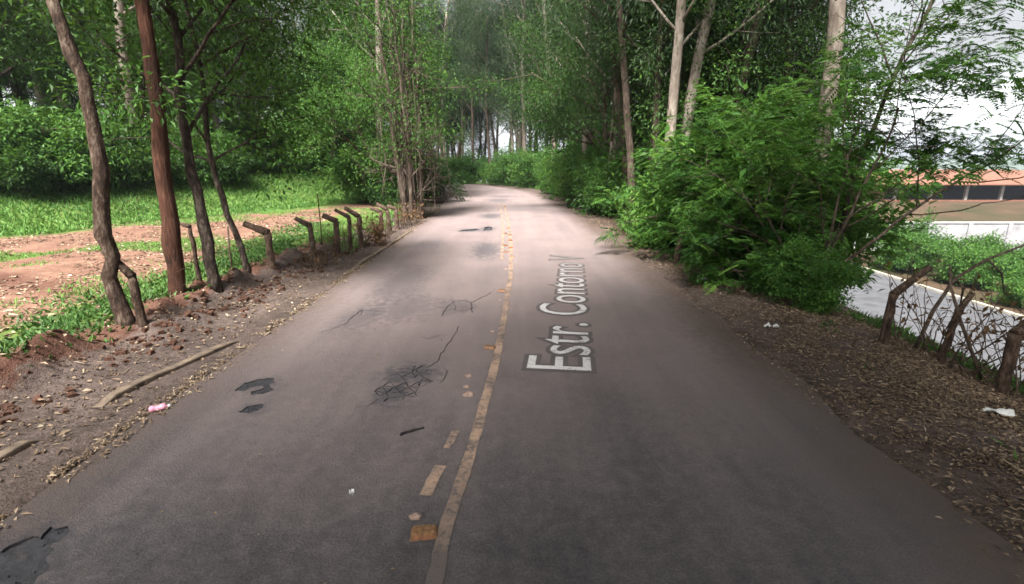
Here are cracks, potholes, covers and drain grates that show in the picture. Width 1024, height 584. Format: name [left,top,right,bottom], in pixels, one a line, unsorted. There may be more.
crack [356,293,490,408]
